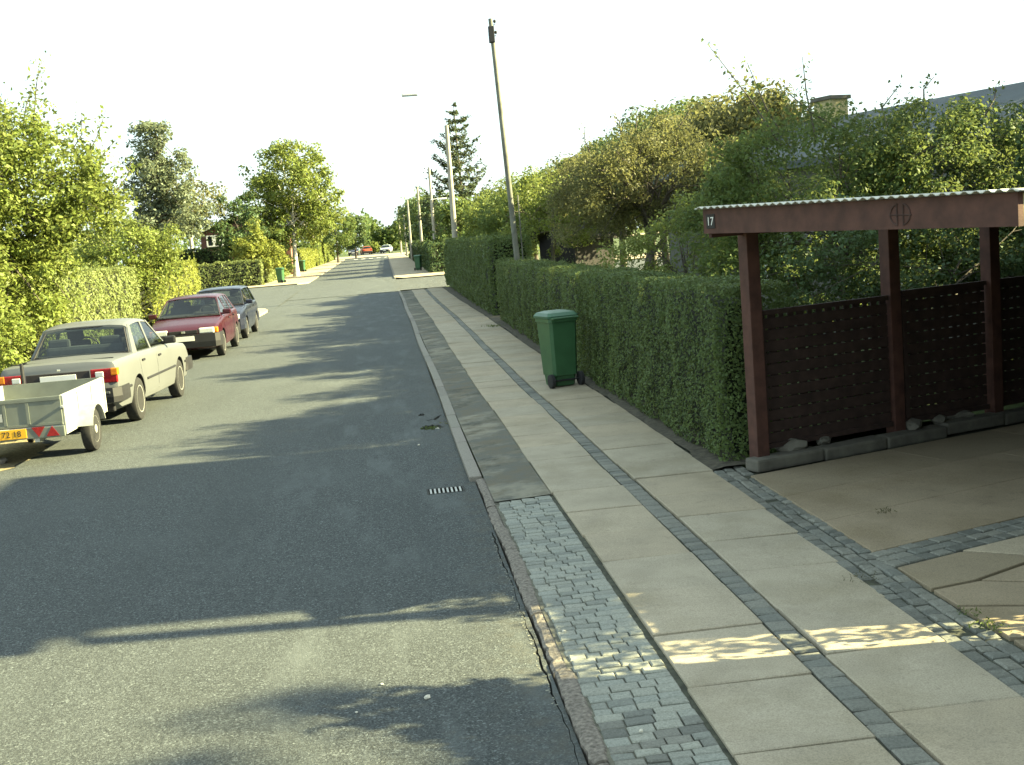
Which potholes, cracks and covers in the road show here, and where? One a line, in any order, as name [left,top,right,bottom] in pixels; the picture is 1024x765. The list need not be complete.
drain grate [427,486,465,495]
crack [492,533,579,765]
